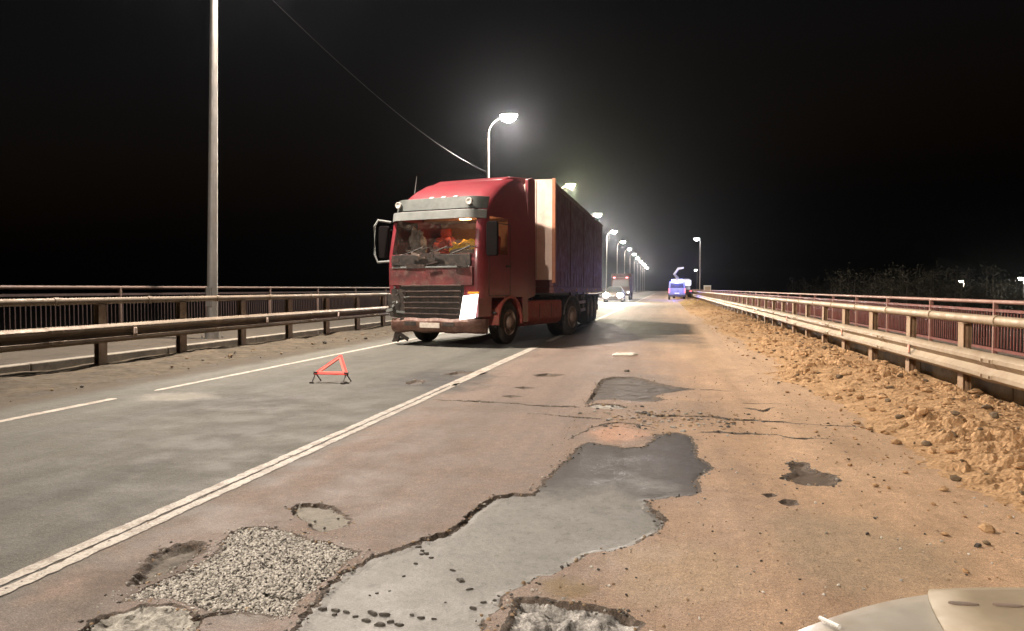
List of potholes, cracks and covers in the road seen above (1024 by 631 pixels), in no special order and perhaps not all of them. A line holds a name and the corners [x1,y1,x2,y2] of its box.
pothole [81,602,203,631]
crack [434,399,860,440]
pothole [779,461,842,486]
pothole [121,526,361,618]
pothole [290,432,715,631]
